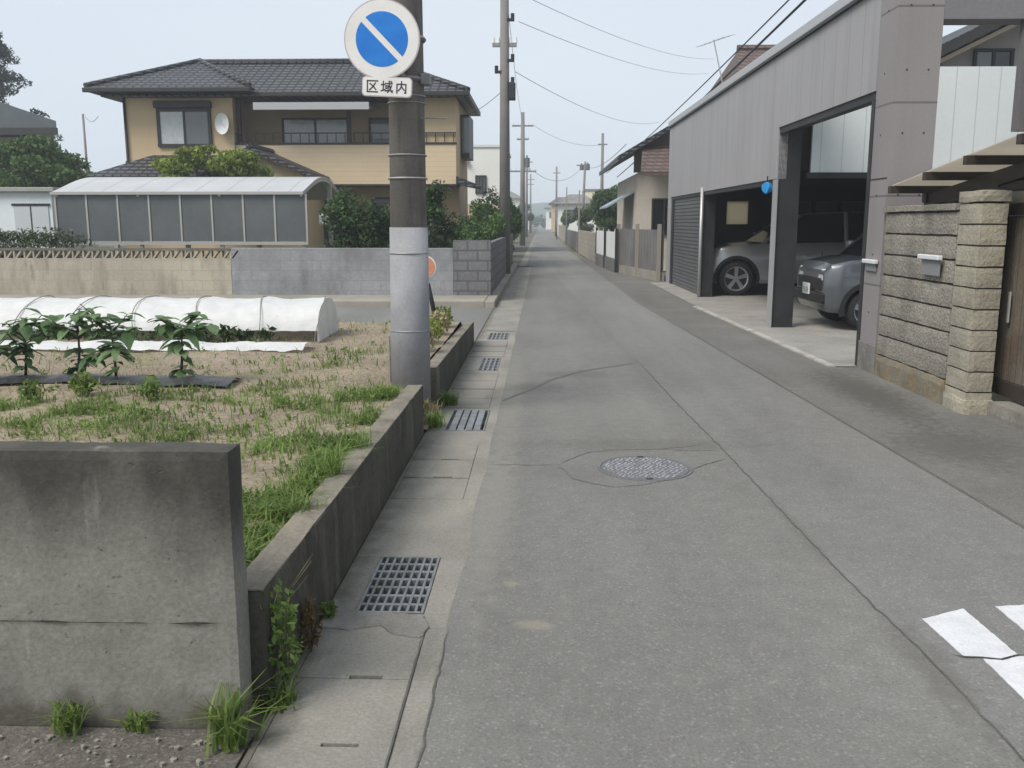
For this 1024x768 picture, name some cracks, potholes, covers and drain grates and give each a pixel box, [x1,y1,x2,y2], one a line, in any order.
drain grate [477,358,501,371]
drain grate [444,410,490,431]
crack [384,633,448,768]
drain grate [356,556,440,614]
manhole cover [597,456,693,481]
